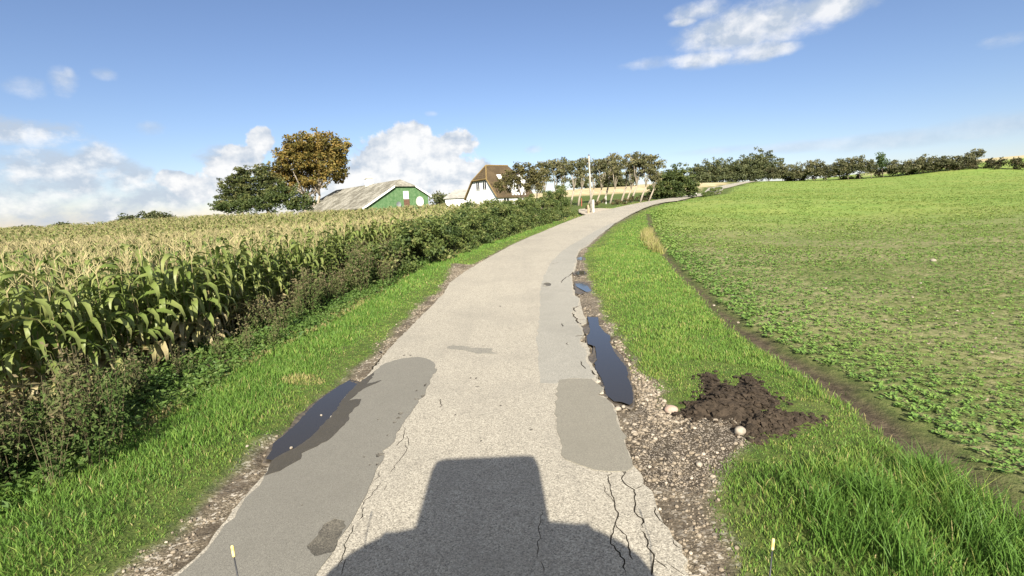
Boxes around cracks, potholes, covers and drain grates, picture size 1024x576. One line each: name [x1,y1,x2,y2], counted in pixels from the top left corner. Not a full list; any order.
pothole [574,281,594,295]
pothole [585,316,635,410]
crack [603,473,683,575]
crack [337,430,409,571]
pothole [261,372,381,476]
